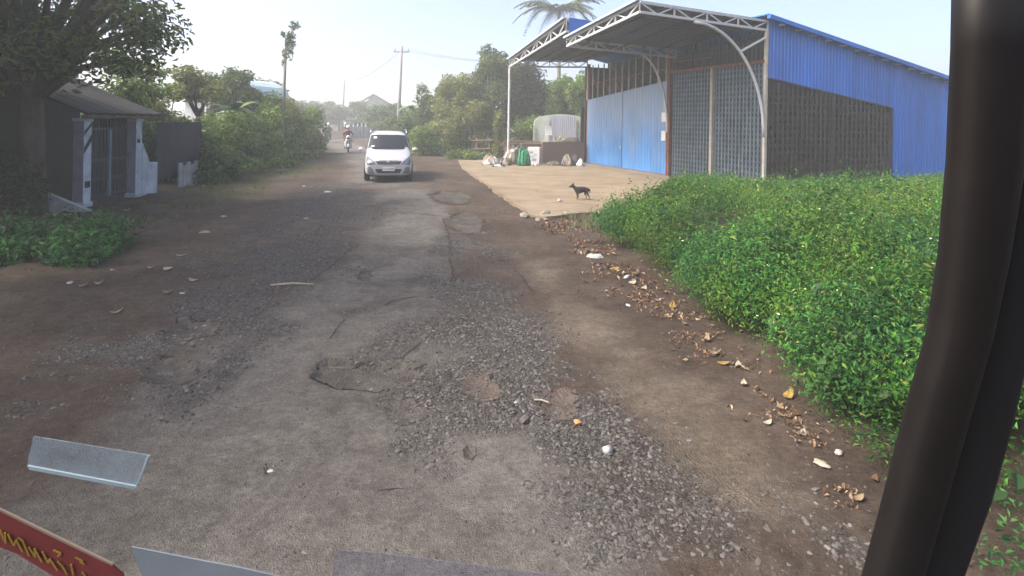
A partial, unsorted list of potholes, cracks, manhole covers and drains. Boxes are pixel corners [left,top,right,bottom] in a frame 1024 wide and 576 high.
pothole [459,373,504,402]
pothole [462,444,478,460]
pothole [375,396,430,425]
pothole [539,387,582,421]
pothole [307,358,423,392]
pothole [136,355,200,386]
crack [391,211,457,282]
